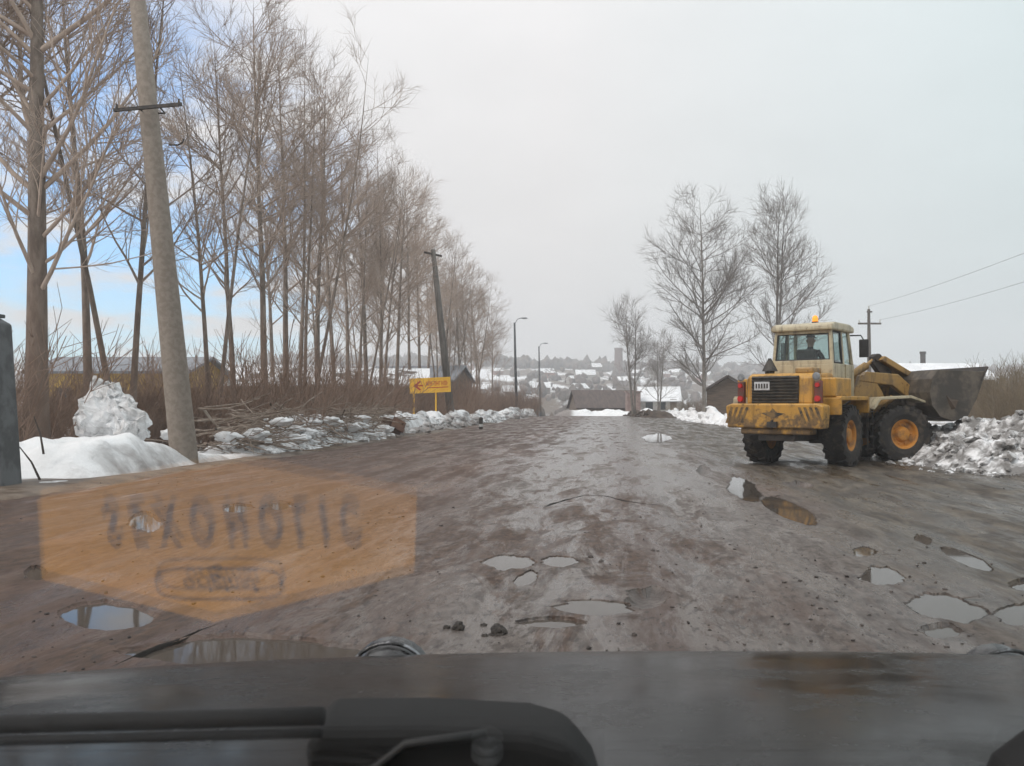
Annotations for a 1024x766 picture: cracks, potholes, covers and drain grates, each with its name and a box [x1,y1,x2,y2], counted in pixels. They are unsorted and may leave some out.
pothole [1007,578,1024,591]
pothole [991,602,1024,626]
pothole [549,598,636,615]
pothole [913,534,933,545]
pothole [916,621,964,639]
pothole [852,546,879,557]
pothole [939,546,994,572]
crack [111,622,222,667]
pothole [857,565,906,585]
pothole [113,632,367,664]
pothole [759,495,819,526]
pothole [540,555,581,567]
